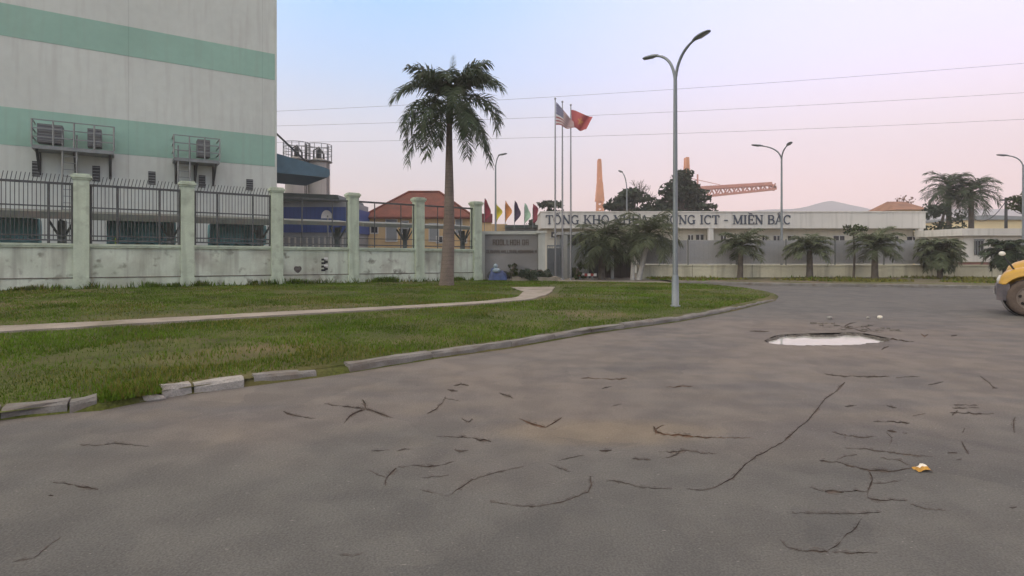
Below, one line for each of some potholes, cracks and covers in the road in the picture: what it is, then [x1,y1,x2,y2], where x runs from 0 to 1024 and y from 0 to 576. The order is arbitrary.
crack [949,405,993,460]
crack [521,417,562,428]
crack [368,419,668,507]
crack [283,399,392,423]
crack [48,482,98,496]
crack [632,374,942,554]
crack [427,384,469,414]
pothole [766,322,901,346]
crack [838,322,928,349]
